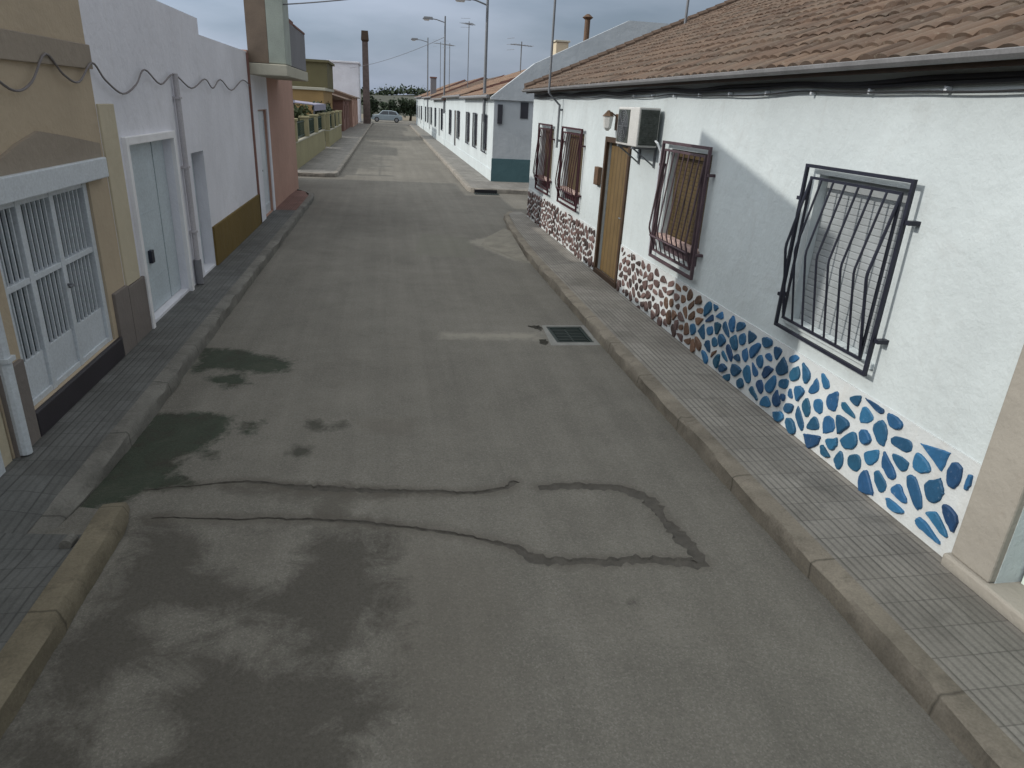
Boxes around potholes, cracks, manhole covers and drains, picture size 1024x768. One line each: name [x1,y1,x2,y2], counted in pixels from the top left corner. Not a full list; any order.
crack [142,480,710,570]
